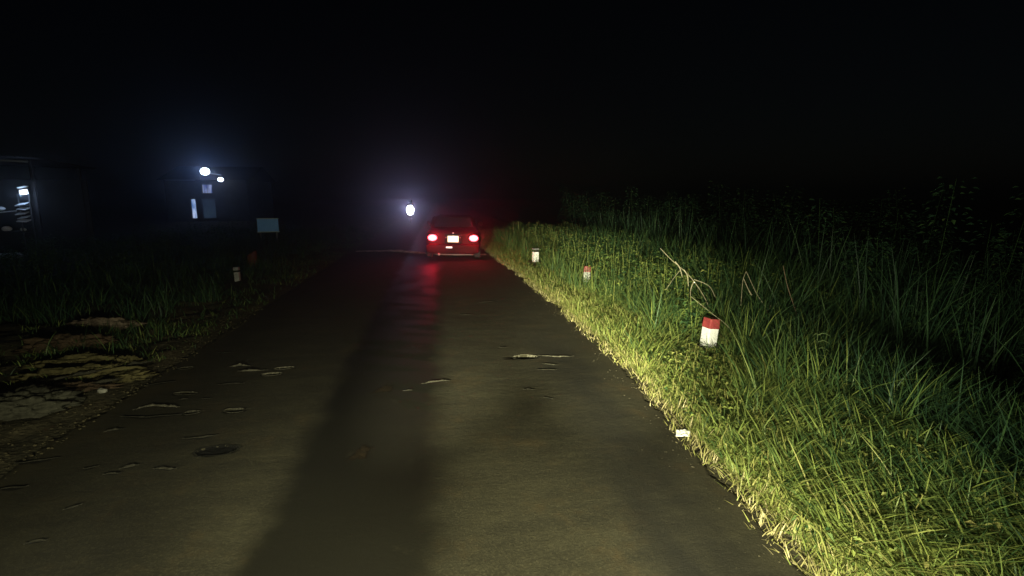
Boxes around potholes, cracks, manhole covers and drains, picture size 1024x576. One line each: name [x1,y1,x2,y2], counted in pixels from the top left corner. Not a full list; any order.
pothole [193,444,242,457]
